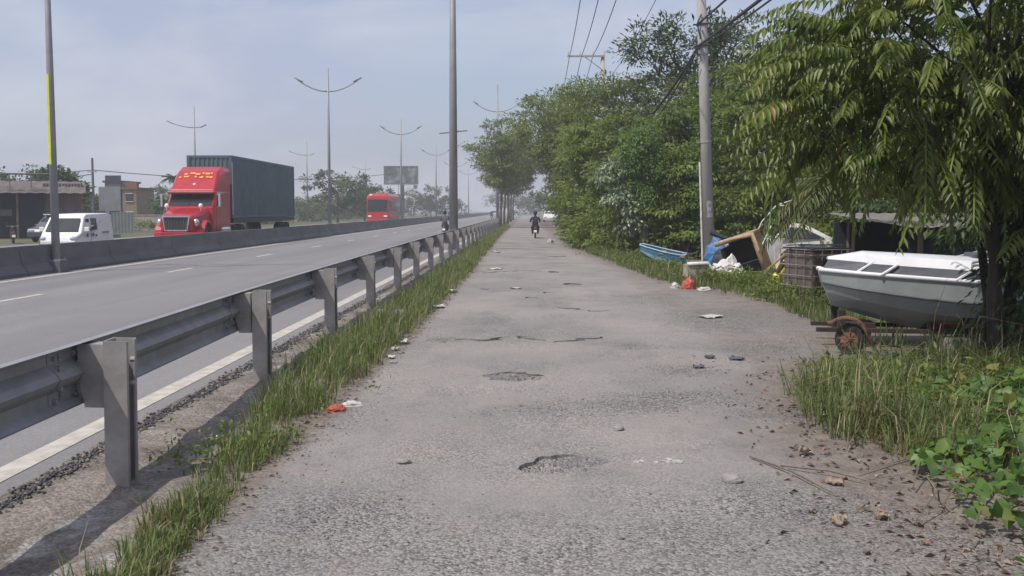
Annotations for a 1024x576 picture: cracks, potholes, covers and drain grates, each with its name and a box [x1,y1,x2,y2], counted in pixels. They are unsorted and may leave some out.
pothole [518,454,609,474]
pothole [482,371,544,382]
